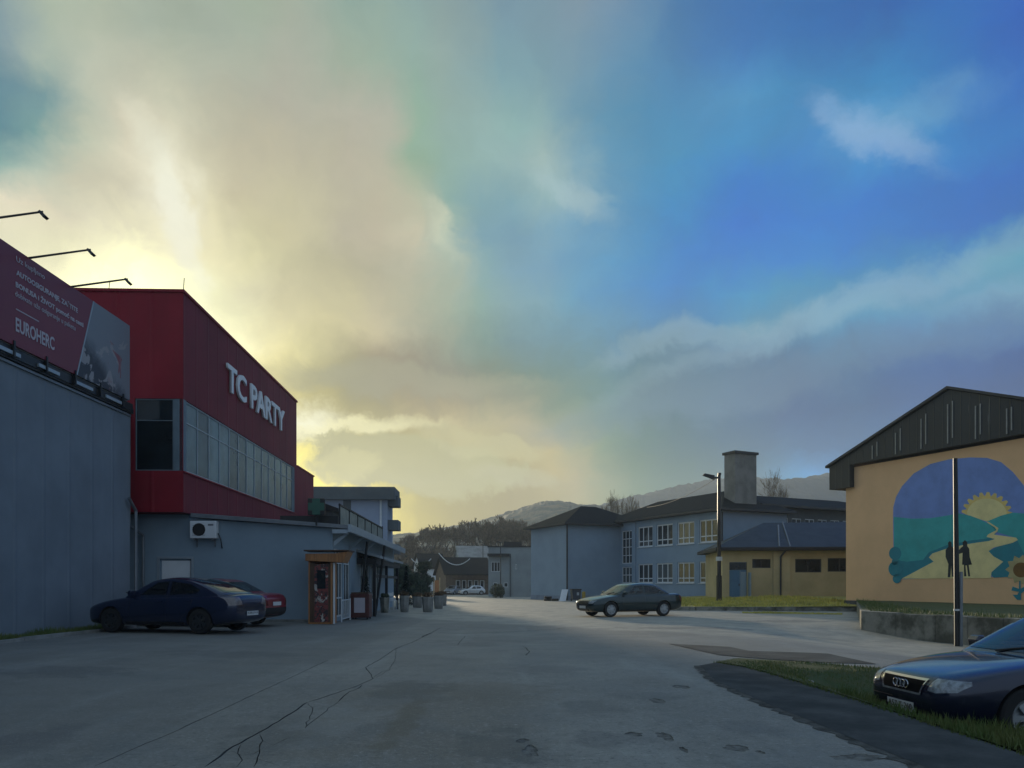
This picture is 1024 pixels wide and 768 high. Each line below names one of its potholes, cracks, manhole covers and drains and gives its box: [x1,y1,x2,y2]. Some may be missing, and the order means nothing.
crack [205,628,561,767]
pothole [722,744,749,752]
pothole [522,745,539,757]
